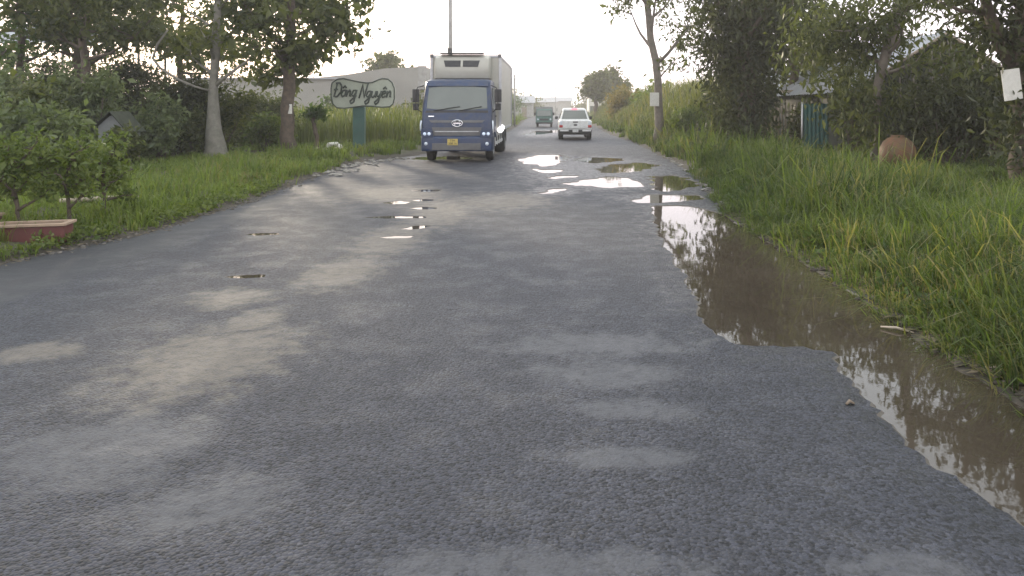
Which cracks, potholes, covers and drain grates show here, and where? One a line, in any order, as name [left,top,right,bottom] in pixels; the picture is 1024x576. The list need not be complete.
pothole [650,205,1024,527]
